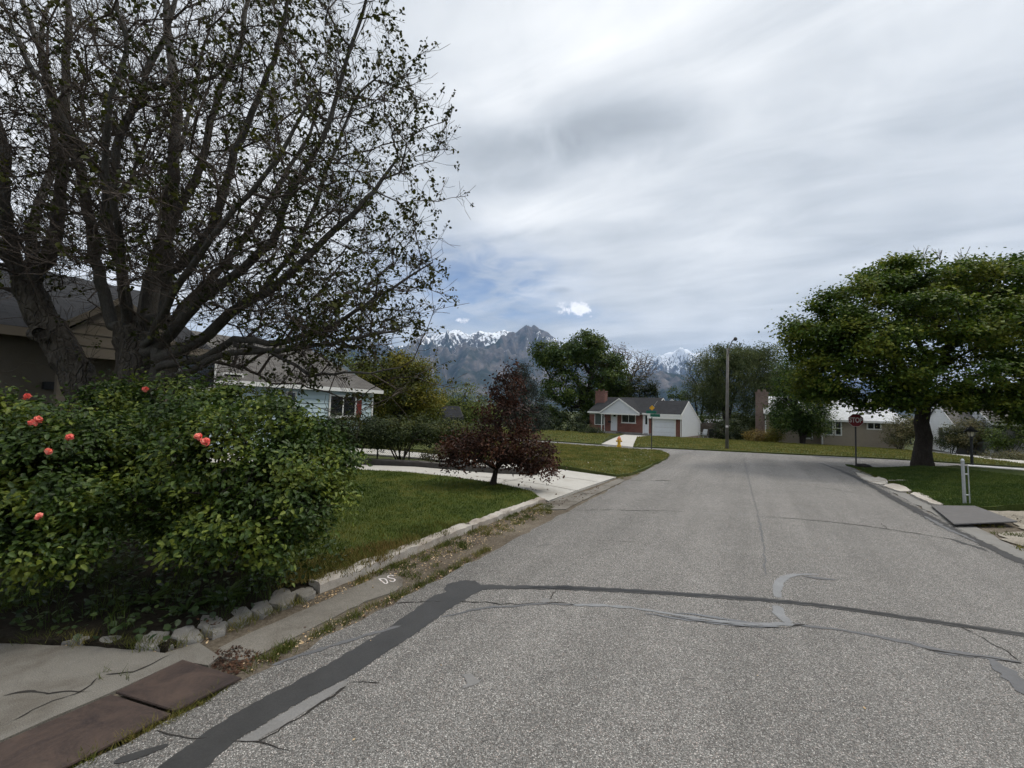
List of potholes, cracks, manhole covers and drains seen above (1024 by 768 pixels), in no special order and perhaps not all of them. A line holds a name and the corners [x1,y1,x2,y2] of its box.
crack [157,730,289,751]
crack [4,655,168,724]
